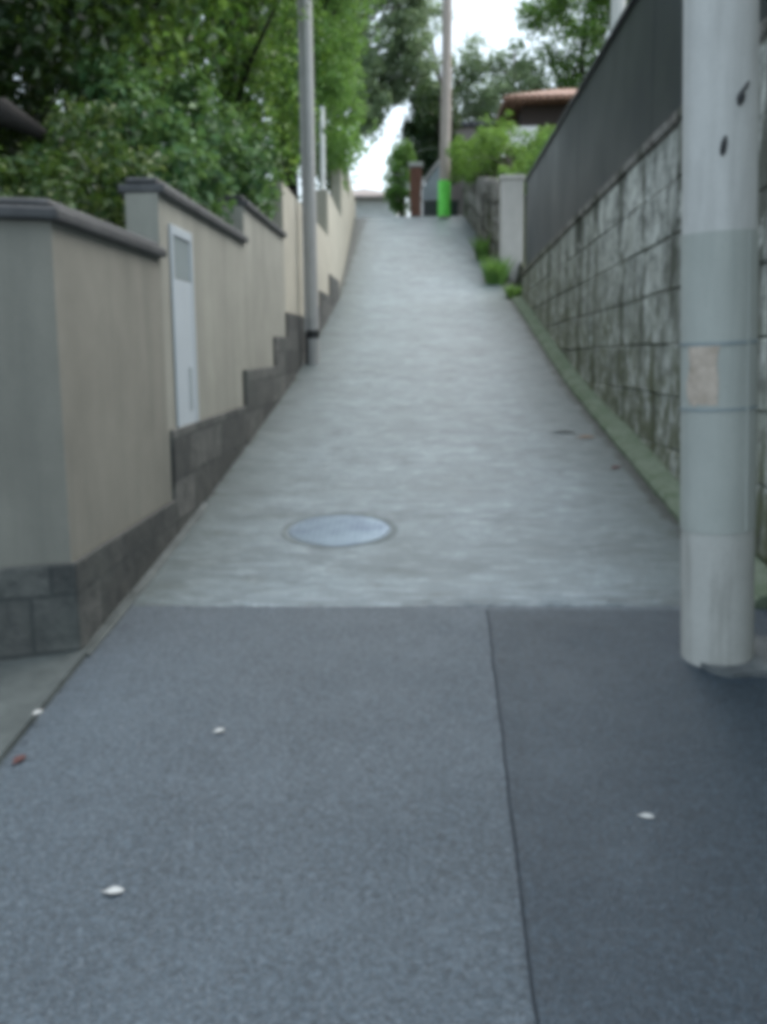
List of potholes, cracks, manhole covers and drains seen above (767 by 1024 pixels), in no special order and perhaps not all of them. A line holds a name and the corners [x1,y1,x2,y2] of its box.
manhole cover [281,513,398,548]
